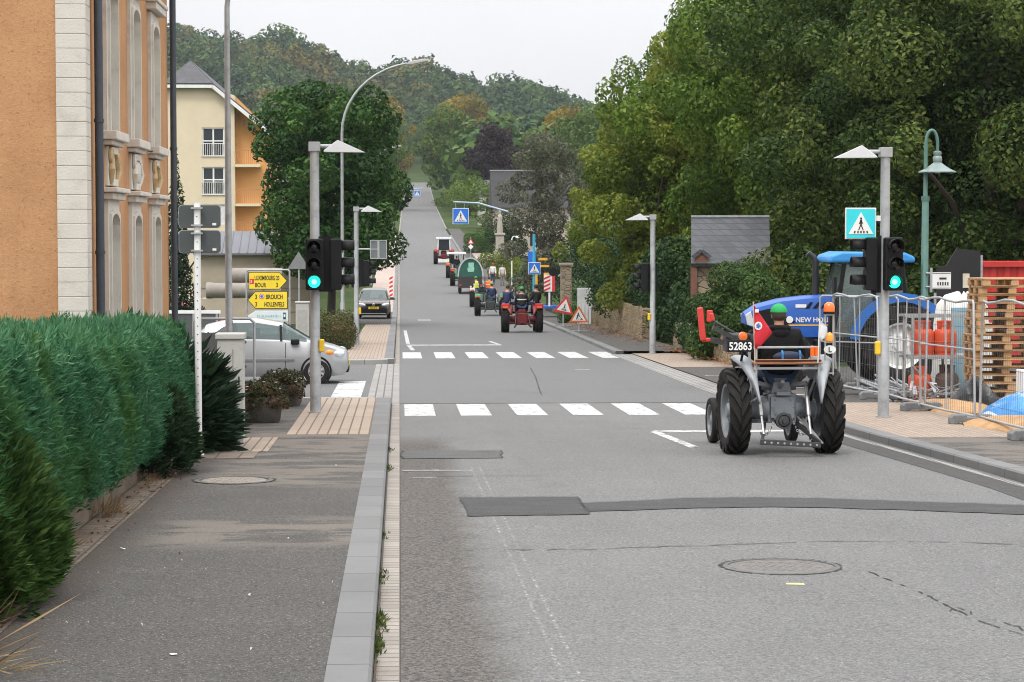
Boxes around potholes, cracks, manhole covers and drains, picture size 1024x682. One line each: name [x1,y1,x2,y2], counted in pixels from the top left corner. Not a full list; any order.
manhole cover [191,476,277,484]
crack [869,571,1024,635]
crack [504,541,1003,550]
manhole cover [717,558,842,575]
